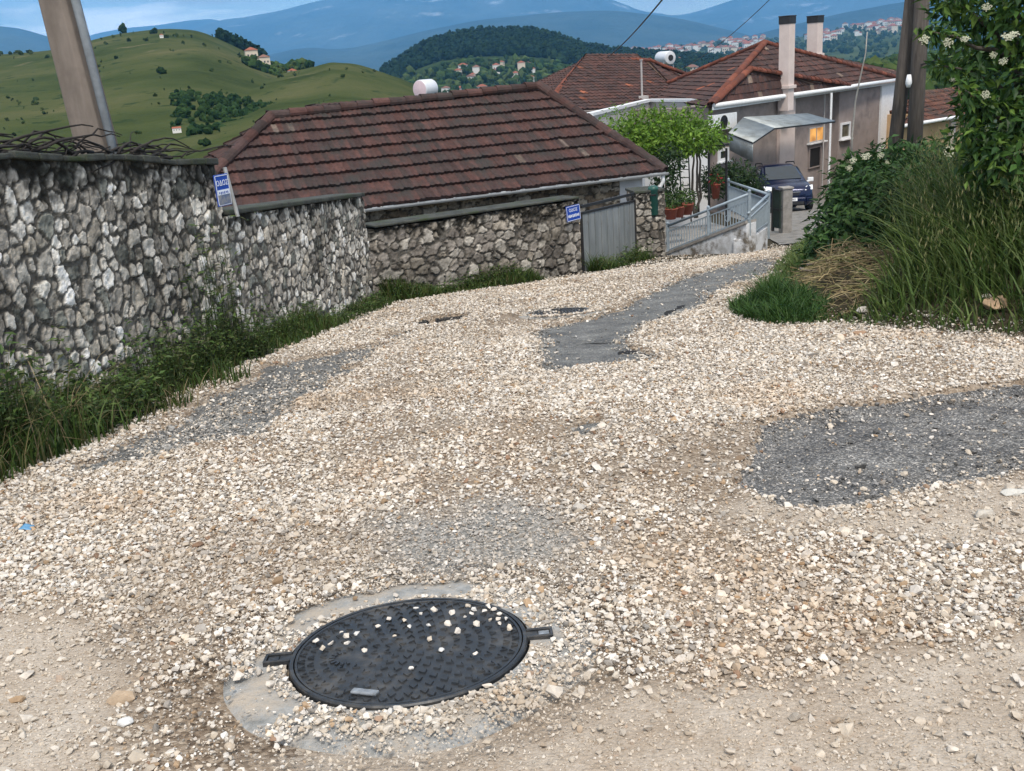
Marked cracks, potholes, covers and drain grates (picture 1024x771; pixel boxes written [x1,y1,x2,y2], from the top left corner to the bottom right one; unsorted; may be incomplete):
pothole [417,316,466,324]
manhole cover [223,580,596,758]
